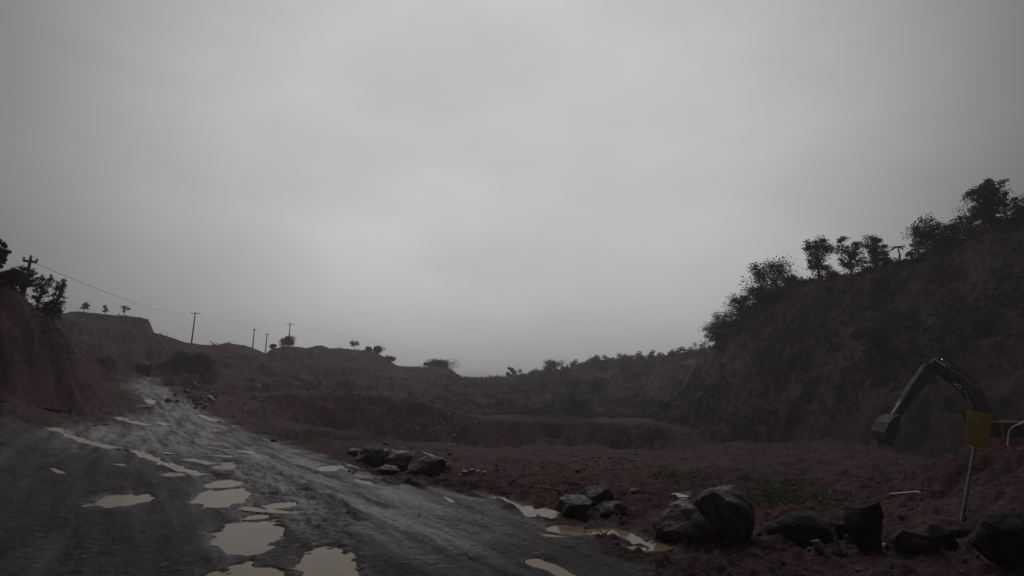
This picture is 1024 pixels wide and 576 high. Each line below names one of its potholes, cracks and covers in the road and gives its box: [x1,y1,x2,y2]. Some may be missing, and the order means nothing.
pothole [157,469,195,477]
pothole [86,490,162,508]
pothole [275,536,369,576]
pothole [313,463,344,471]
pothole [191,559,282,576]
pothole [202,515,290,562]
pothole [182,485,257,510]
pothole [208,460,240,471]
